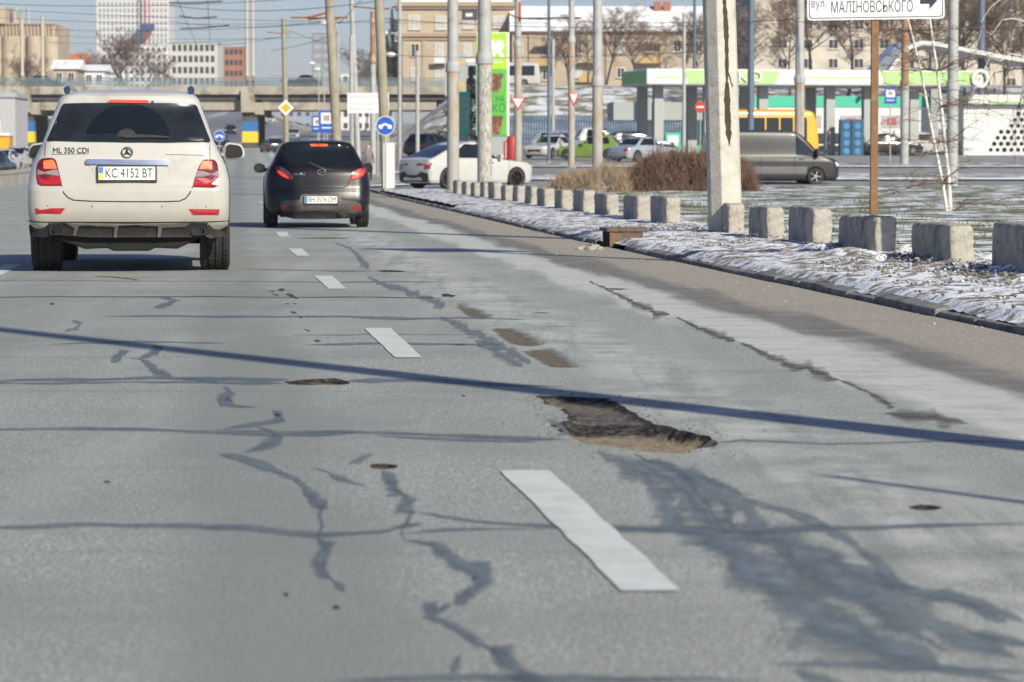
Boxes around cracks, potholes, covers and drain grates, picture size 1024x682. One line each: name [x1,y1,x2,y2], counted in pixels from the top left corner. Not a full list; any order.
pothole [536,396,718,453]
